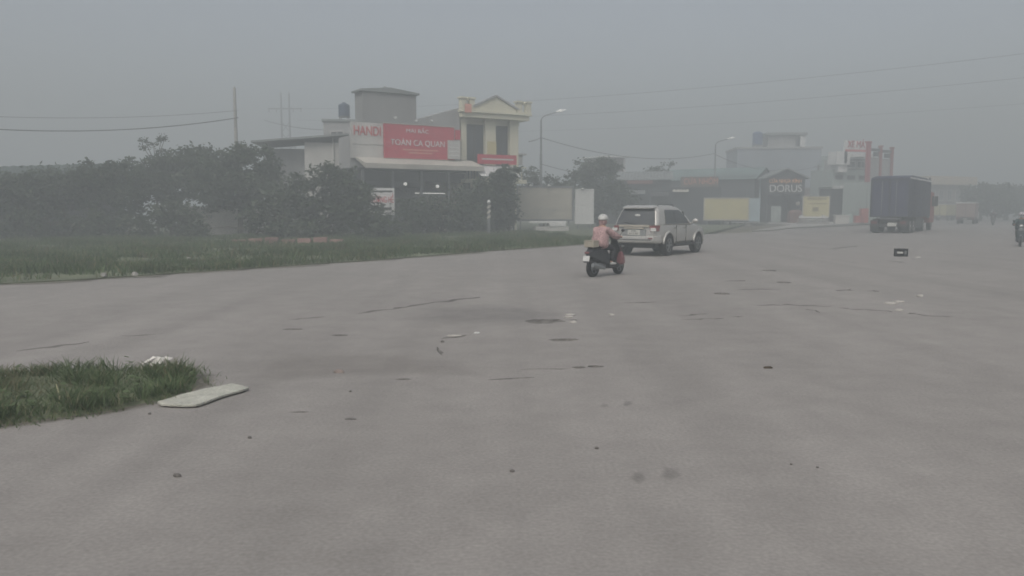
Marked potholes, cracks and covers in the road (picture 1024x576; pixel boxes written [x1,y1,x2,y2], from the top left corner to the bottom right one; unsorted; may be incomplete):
crack [684,280,949,320]
crack [19,342,87,351]
crack [358,297,479,314]
crack [490,368,571,380]
